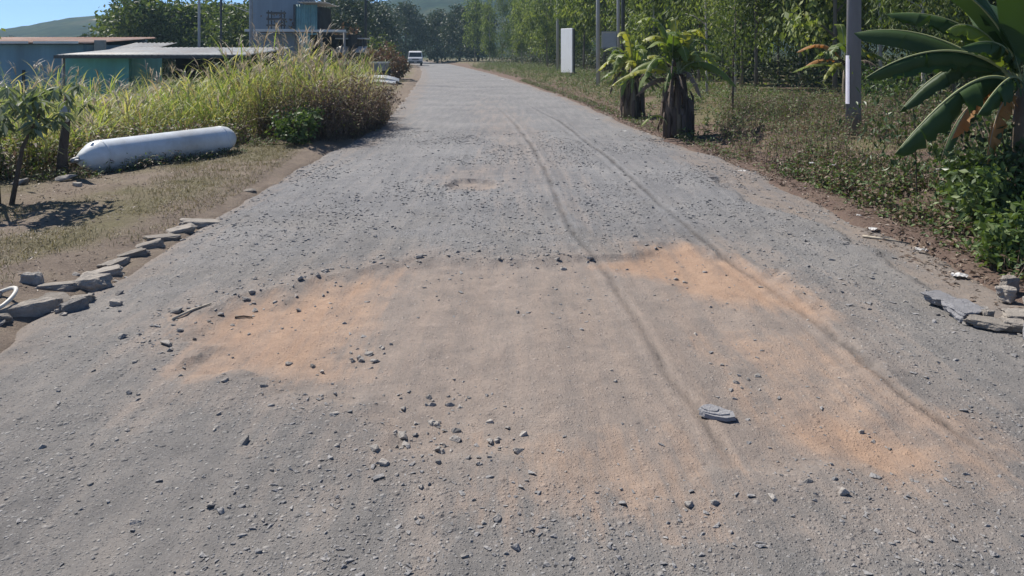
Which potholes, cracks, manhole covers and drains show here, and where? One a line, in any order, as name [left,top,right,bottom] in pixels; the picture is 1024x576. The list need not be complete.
pothole [441,178,501,191]
